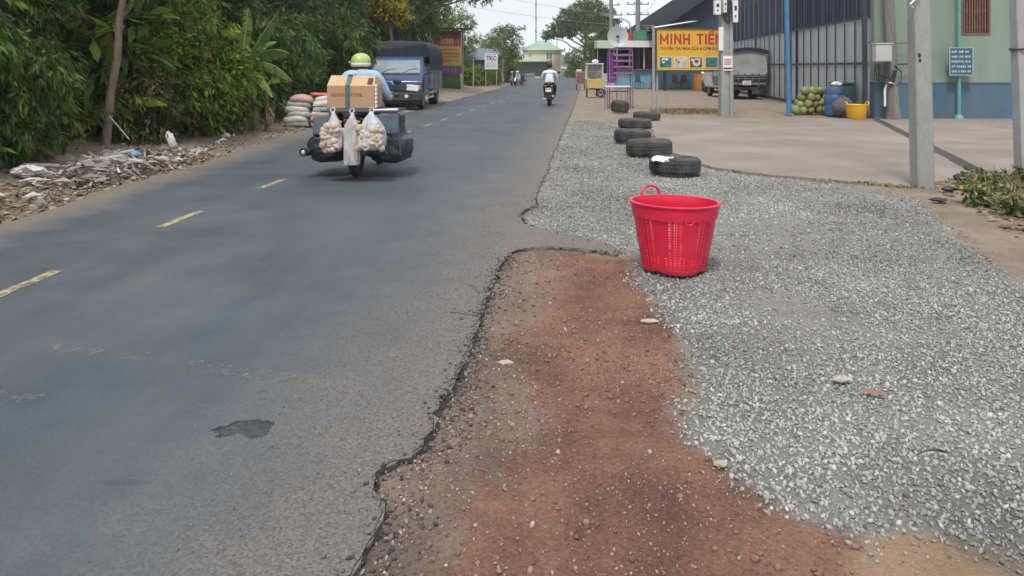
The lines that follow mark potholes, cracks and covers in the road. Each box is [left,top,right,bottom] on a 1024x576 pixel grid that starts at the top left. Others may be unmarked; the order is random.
crack [348,246,593,576]
